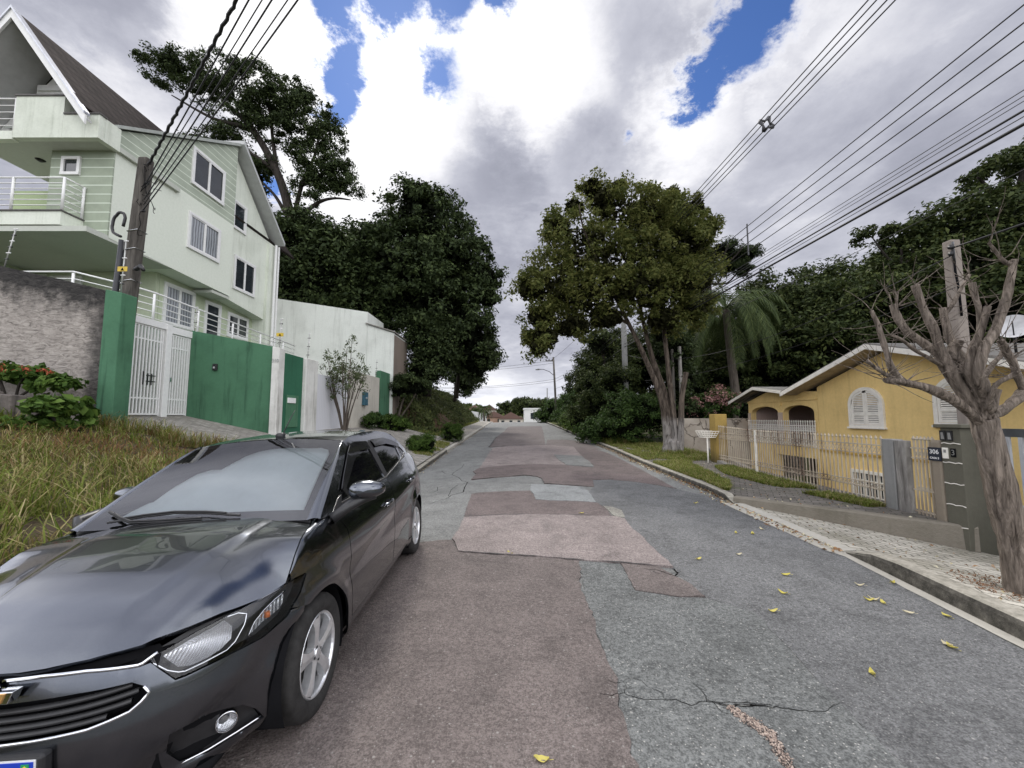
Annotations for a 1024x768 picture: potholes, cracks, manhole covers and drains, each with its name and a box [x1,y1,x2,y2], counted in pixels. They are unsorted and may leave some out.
crack [624,691,776,708]
